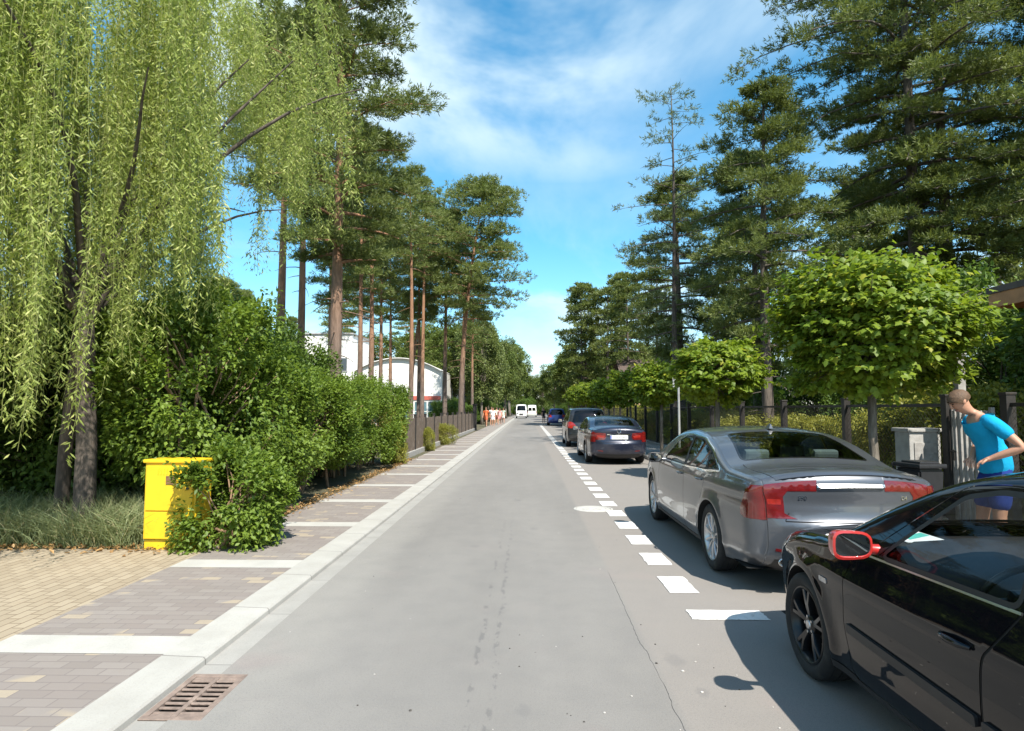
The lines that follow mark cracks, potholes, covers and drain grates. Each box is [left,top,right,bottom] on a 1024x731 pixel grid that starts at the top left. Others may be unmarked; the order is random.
drain grate [137,674,248,721]
